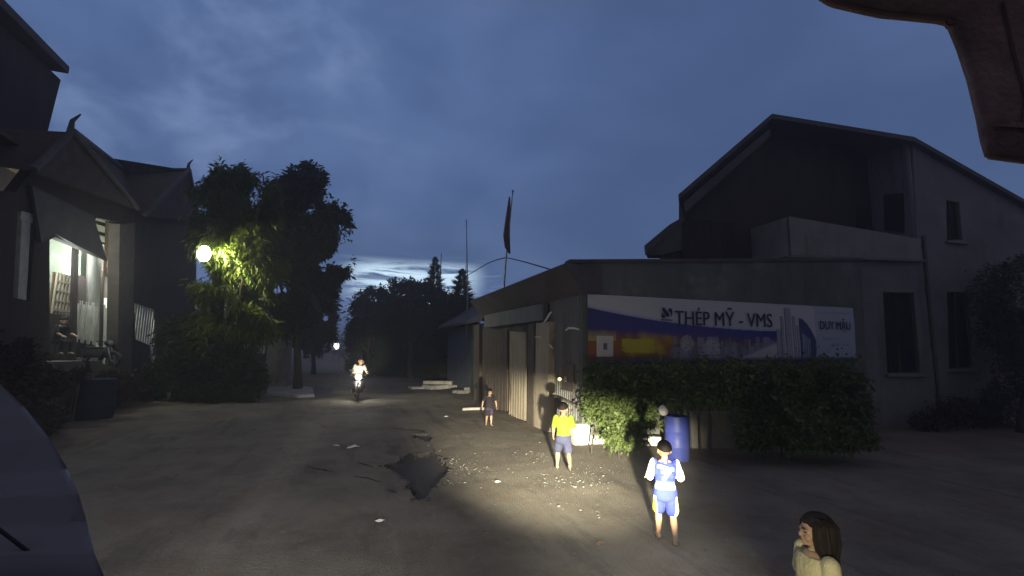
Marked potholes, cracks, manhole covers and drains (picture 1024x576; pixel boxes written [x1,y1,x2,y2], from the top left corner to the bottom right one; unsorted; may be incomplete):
pothole [410,432,435,442]
pothole [379,449,453,502]
